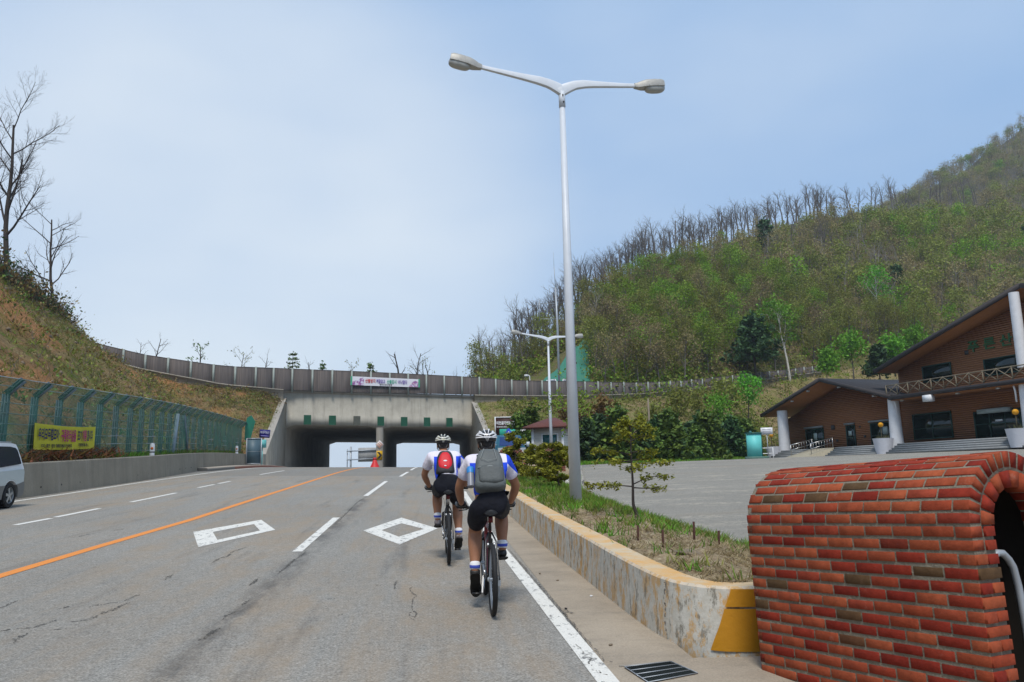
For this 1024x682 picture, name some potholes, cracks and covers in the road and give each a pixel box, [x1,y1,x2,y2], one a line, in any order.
crack [3,595,137,643]
drain grate [619,661,698,682]
